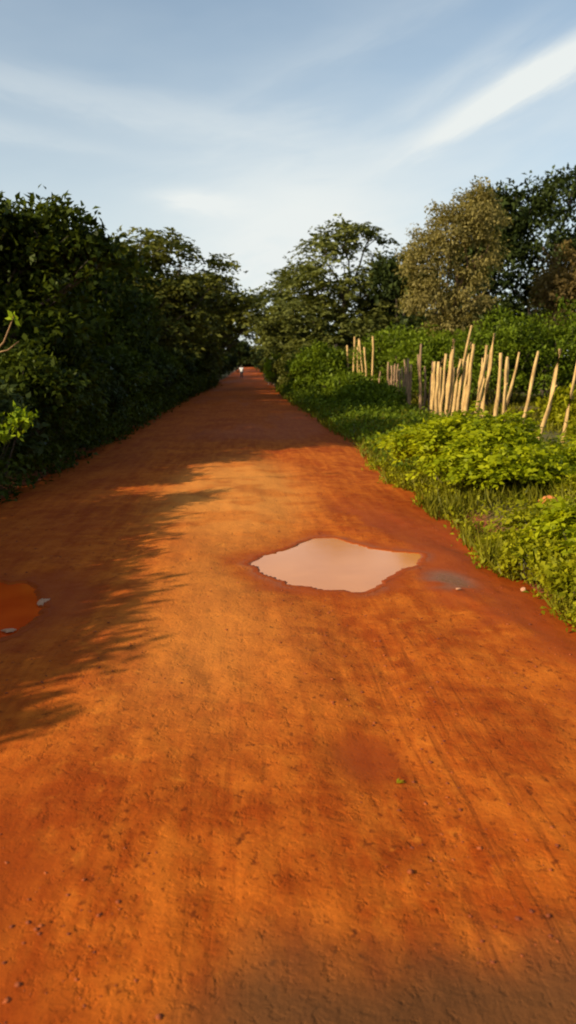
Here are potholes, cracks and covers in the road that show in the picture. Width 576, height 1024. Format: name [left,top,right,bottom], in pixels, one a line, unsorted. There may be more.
pothole [243,536,429,595]
pothole [0,578,57,642]
